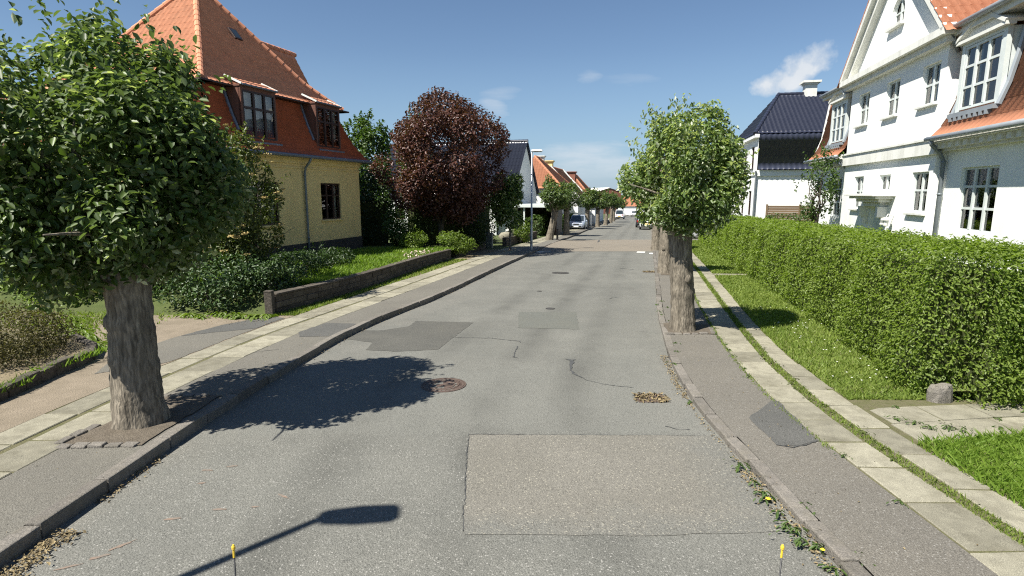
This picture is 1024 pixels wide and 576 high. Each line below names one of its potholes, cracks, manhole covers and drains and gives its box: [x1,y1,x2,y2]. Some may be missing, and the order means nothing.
manhole cover [421,378,466,393]
crack [567,359,627,387]
